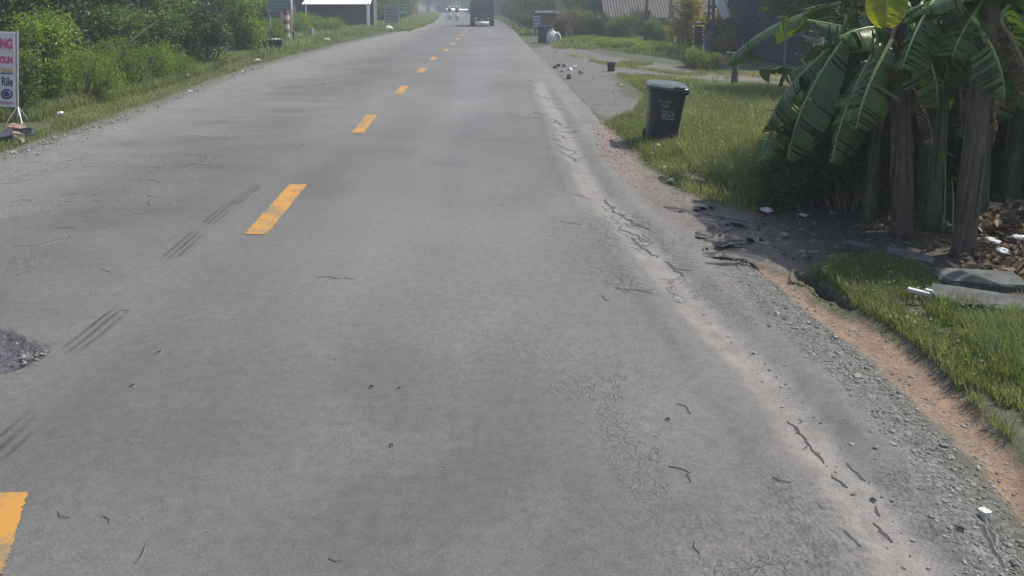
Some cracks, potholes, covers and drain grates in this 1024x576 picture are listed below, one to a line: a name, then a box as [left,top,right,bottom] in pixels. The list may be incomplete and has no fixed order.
crack [1,157,103,260]
crack [547,374,691,504]
crack [507,54,623,162]
crack [560,194,765,303]
pothole [0,328,56,378]
crack [773,421,893,547]
